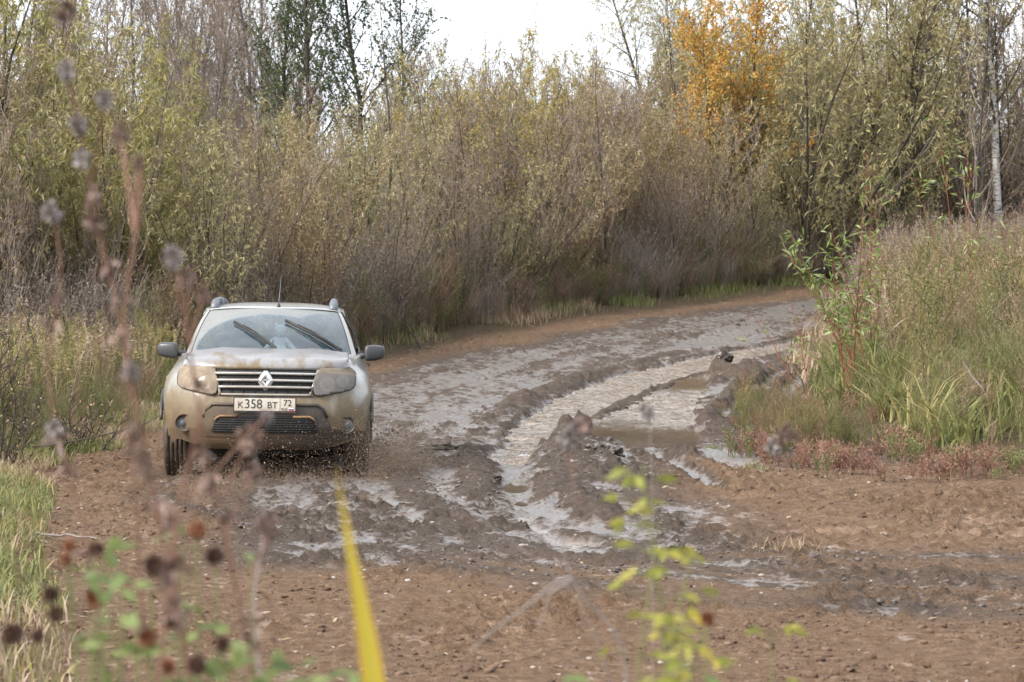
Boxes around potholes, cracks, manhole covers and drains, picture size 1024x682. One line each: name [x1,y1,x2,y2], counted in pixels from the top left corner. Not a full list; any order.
pothole [581,360,720,449]
